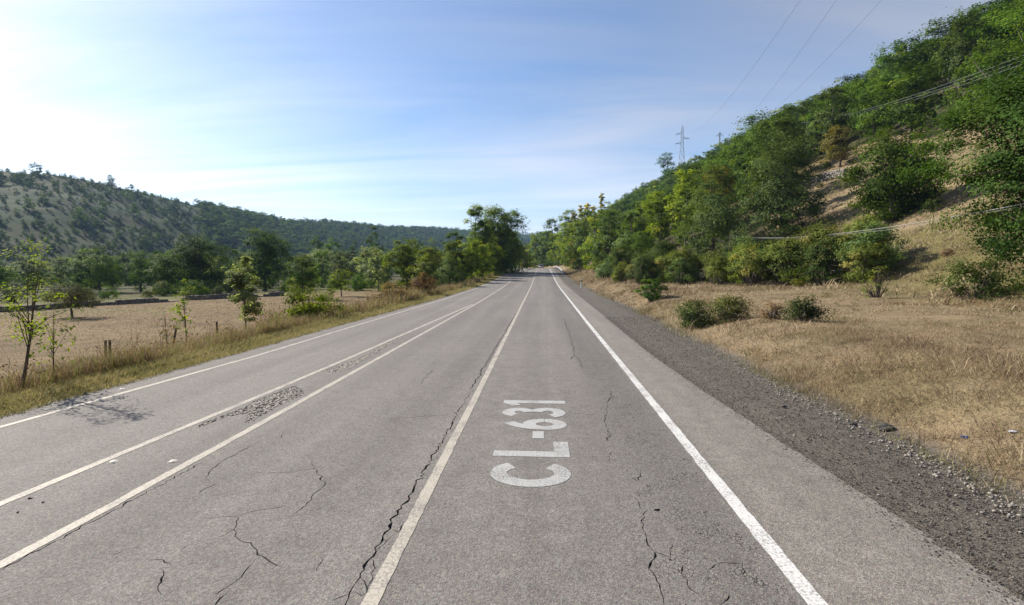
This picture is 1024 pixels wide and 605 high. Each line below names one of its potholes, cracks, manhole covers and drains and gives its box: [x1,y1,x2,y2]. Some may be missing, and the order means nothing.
crack [332,313,516,605]
crack [215,459,326,605]
crack [604,389,746,603]
pothole [199,386,304,427]
pothole [321,338,402,372]
crack [155,544,192,595]
